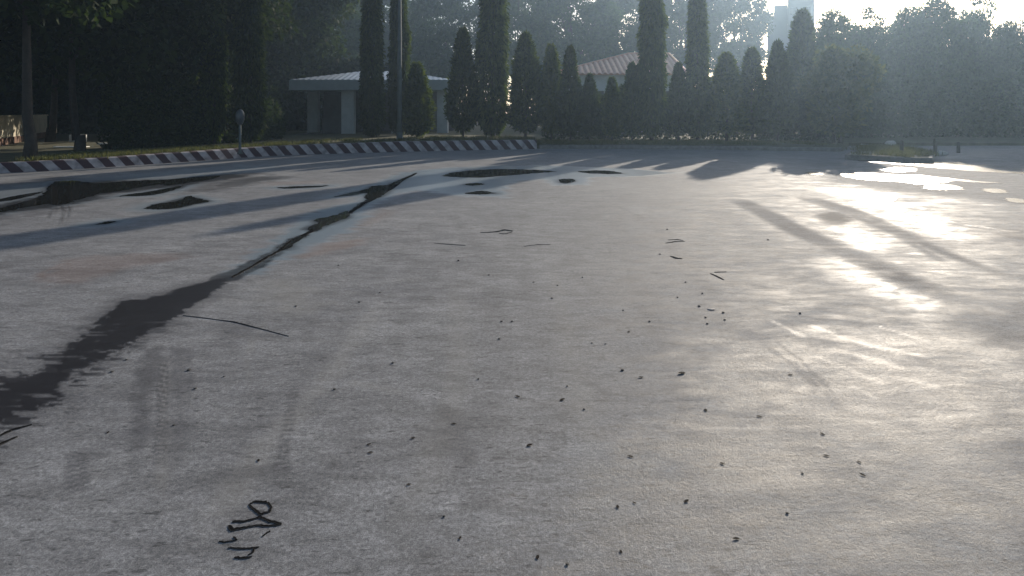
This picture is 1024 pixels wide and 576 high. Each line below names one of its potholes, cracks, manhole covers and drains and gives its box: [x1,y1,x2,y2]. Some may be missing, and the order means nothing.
crack [0,424,32,445]
crack [437,229,550,246]
crack [183,315,288,336]
crack [219,500,282,560]
